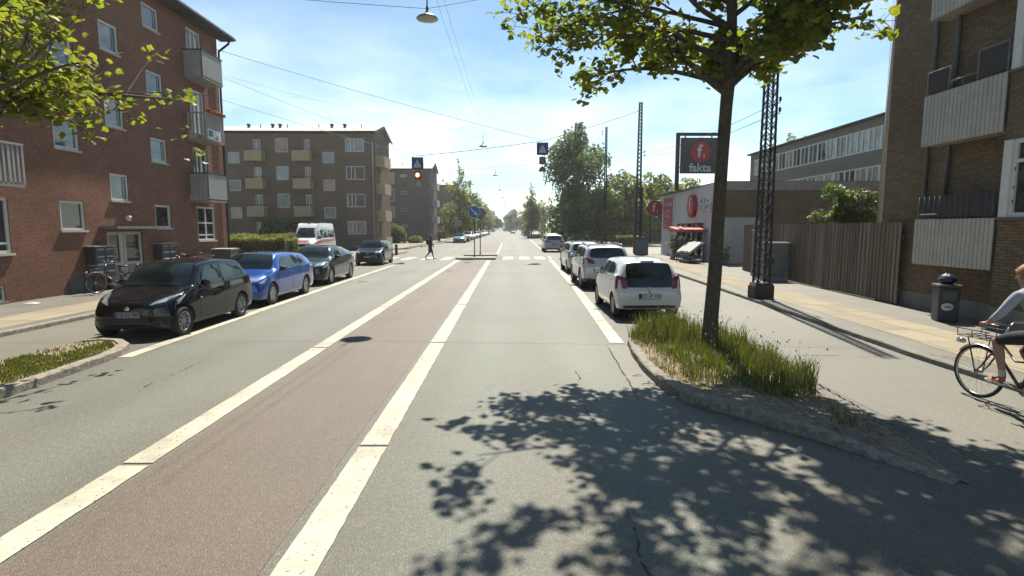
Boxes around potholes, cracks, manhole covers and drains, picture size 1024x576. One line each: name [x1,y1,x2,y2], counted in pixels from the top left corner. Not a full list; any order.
crack [624,507,652,576]
